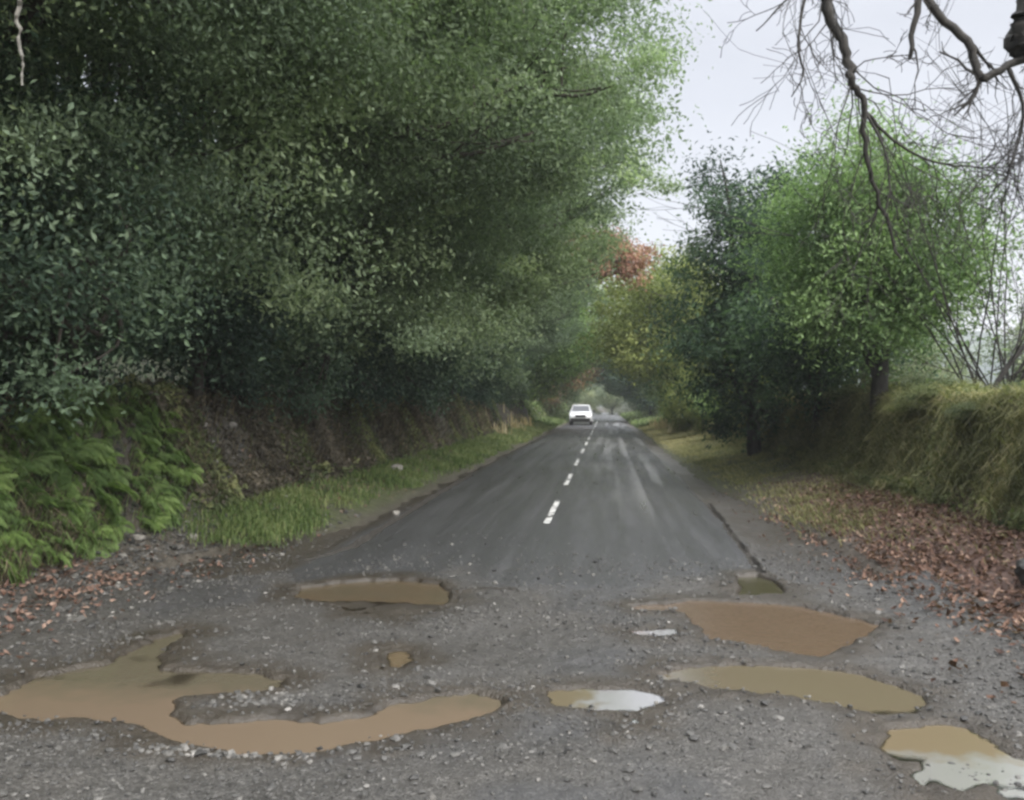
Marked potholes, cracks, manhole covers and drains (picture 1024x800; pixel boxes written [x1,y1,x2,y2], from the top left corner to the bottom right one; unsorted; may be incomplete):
pothole [730,571,791,595]
pothole [284,576,458,620]
pothole [868,716,1024,800]
pothole [0,624,518,758]
pothole [650,660,941,719]
pothole [537,682,680,726]
pothole [619,597,889,659]
